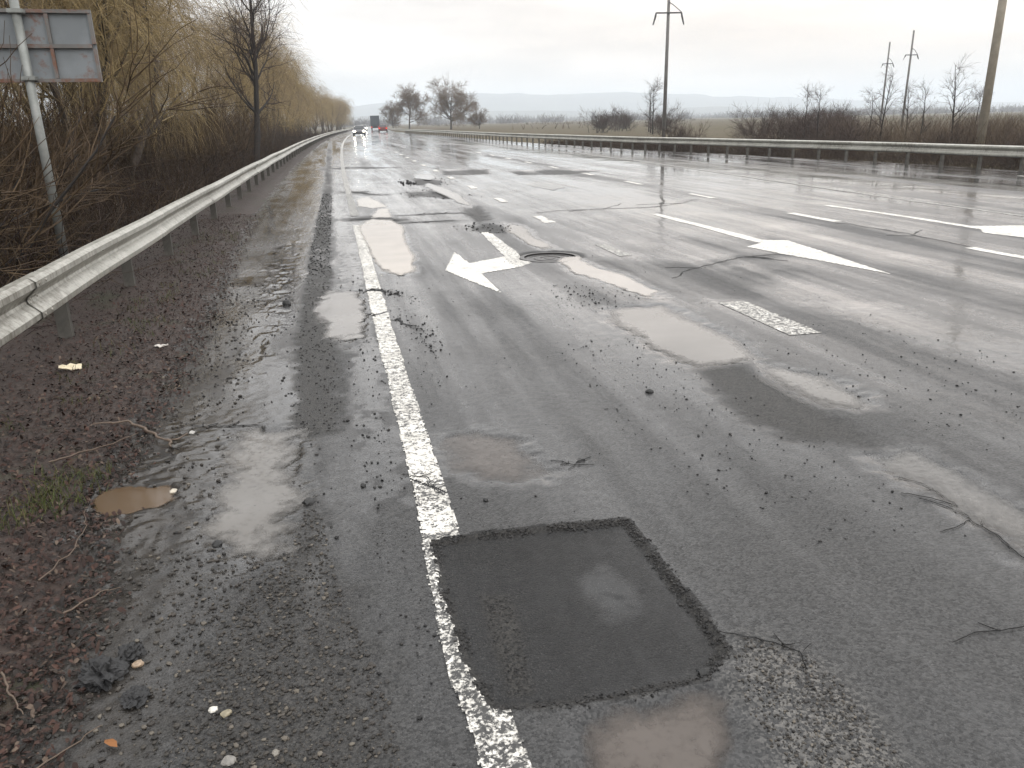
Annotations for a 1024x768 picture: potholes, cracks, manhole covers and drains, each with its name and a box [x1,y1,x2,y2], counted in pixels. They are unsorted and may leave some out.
crack [718,630,812,670]
manhole cover [520,252,580,263]
pothole [411,175,449,186]
crack [952,622,1024,643]
crack [665,254,786,278]
pothole [459,221,512,235]
crack [552,456,593,469]
crack [899,477,1024,558]
